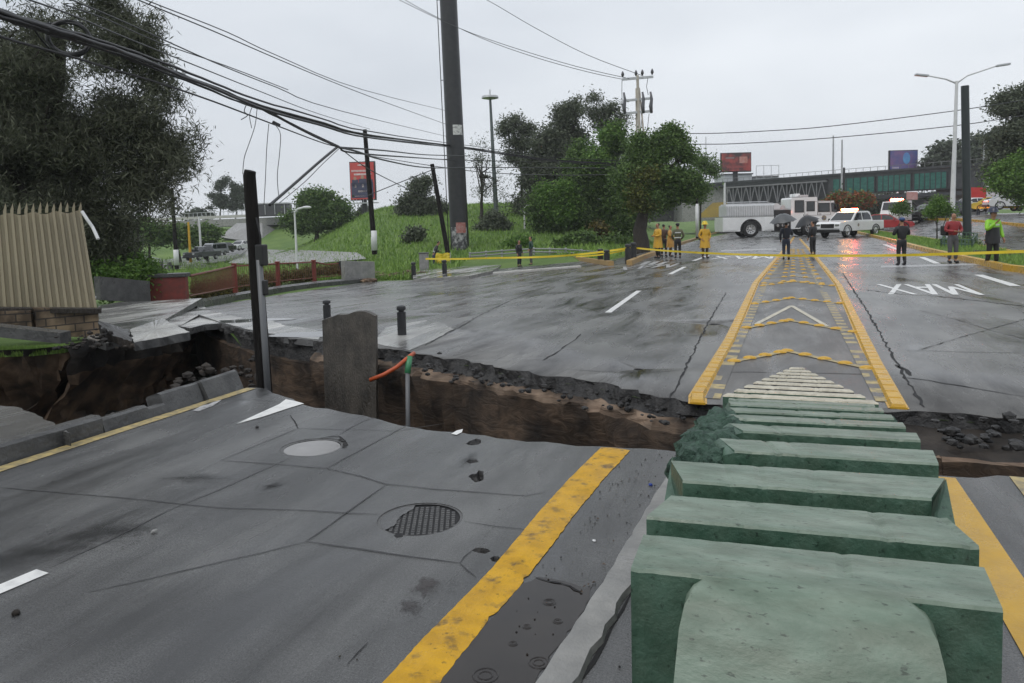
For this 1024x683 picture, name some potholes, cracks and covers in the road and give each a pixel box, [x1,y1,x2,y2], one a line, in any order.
pothole [469,470,484,482]
manhole cover [280,438,348,457]
crack [861,289,1024,396]
